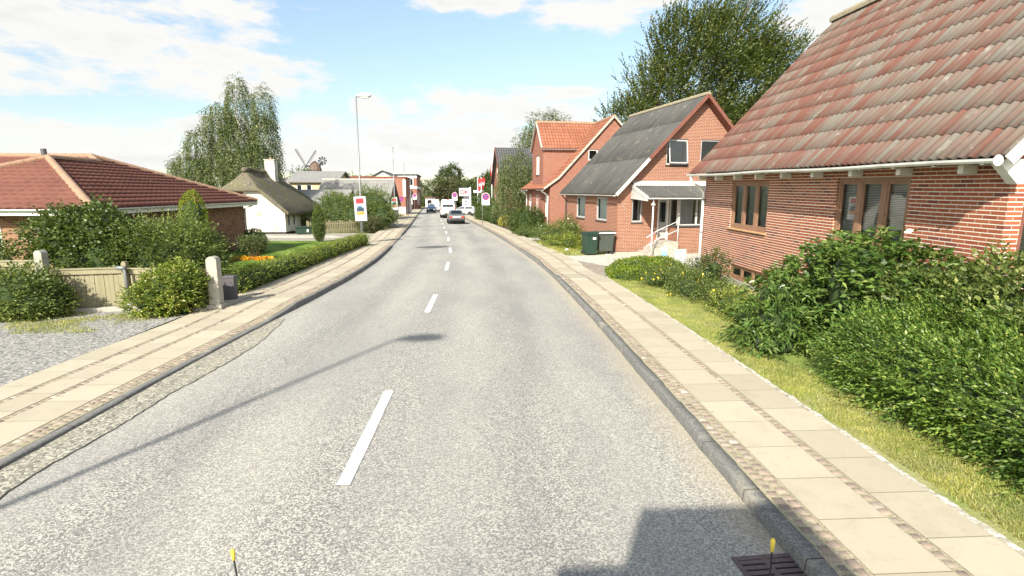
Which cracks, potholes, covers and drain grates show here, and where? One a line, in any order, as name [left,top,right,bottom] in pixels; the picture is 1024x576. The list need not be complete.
drain grate [731,553,807,576]
